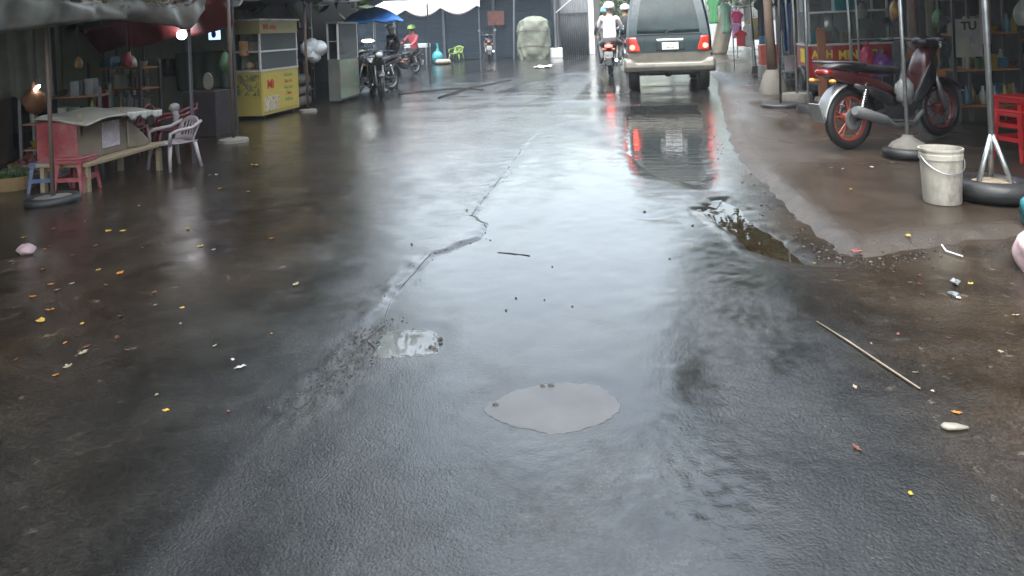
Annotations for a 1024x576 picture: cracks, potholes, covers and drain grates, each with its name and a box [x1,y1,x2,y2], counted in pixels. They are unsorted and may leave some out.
pothole [372,330,443,359]
